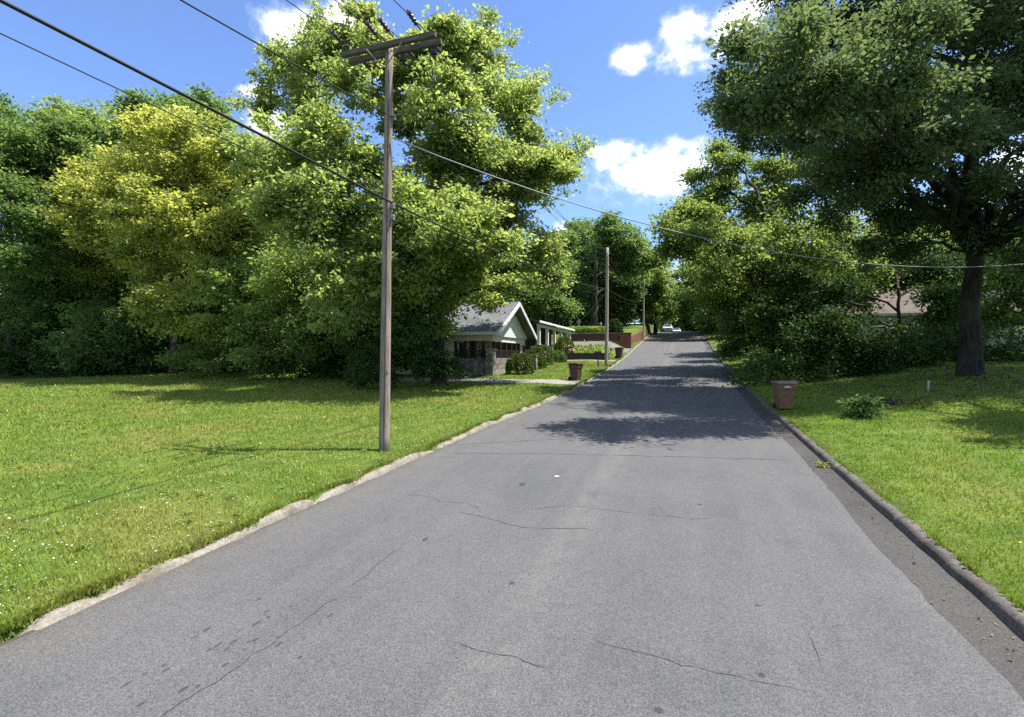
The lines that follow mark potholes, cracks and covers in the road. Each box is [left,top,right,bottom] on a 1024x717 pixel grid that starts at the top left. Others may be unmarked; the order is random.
crack [402,494,592,530]
crack [550,637,806,692]
crack [160,549,399,717]
